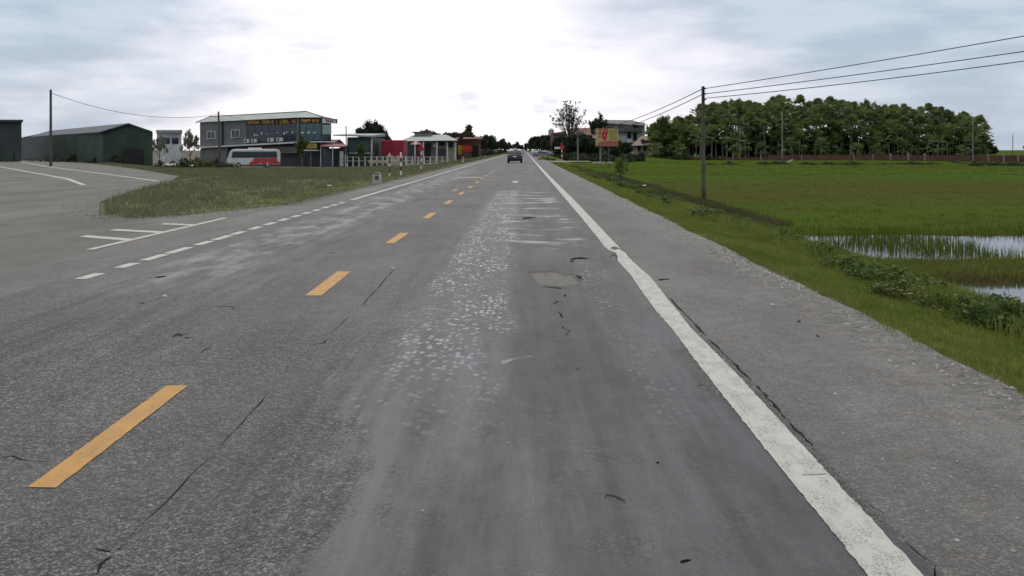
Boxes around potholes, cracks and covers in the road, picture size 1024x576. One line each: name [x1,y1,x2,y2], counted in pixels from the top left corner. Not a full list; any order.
crack [669,297,813,446]
crack [311,271,393,346]
crack [905,541,937,576]
crack [94,397,265,575]
